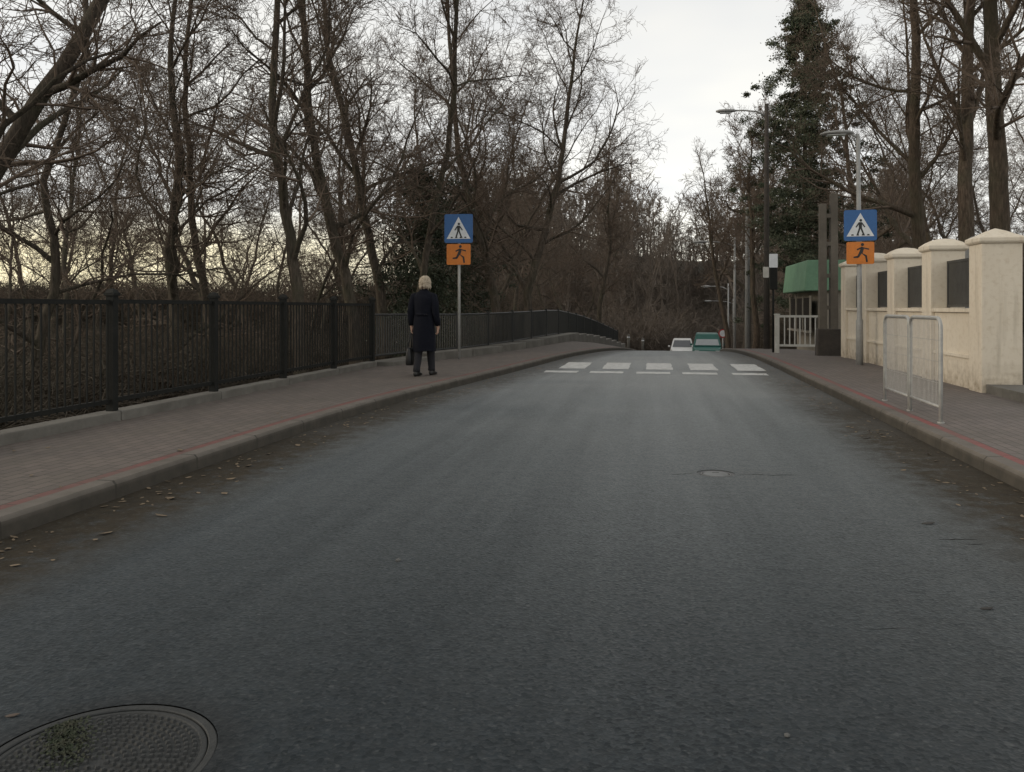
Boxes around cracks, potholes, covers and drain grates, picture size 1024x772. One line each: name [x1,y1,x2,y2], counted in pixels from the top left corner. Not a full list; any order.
manhole cover [0,705,218,772]
